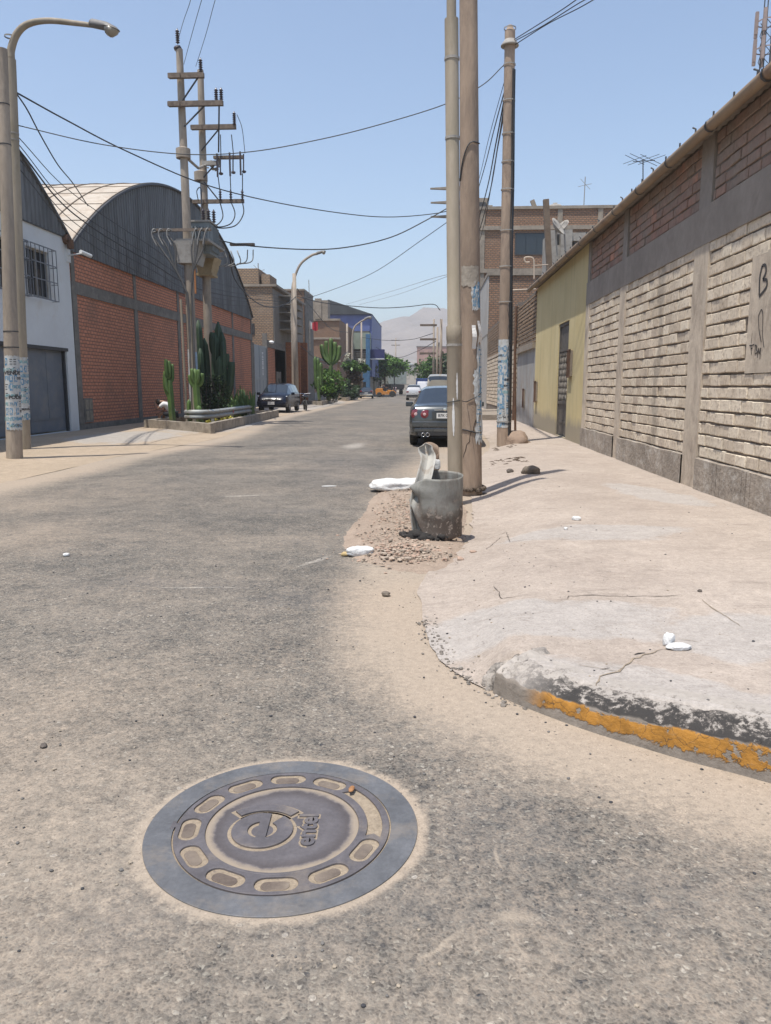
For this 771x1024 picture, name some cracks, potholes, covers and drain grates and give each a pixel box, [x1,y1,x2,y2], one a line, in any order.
manhole cover [142,761,418,918]
crack [582,639,697,685]
